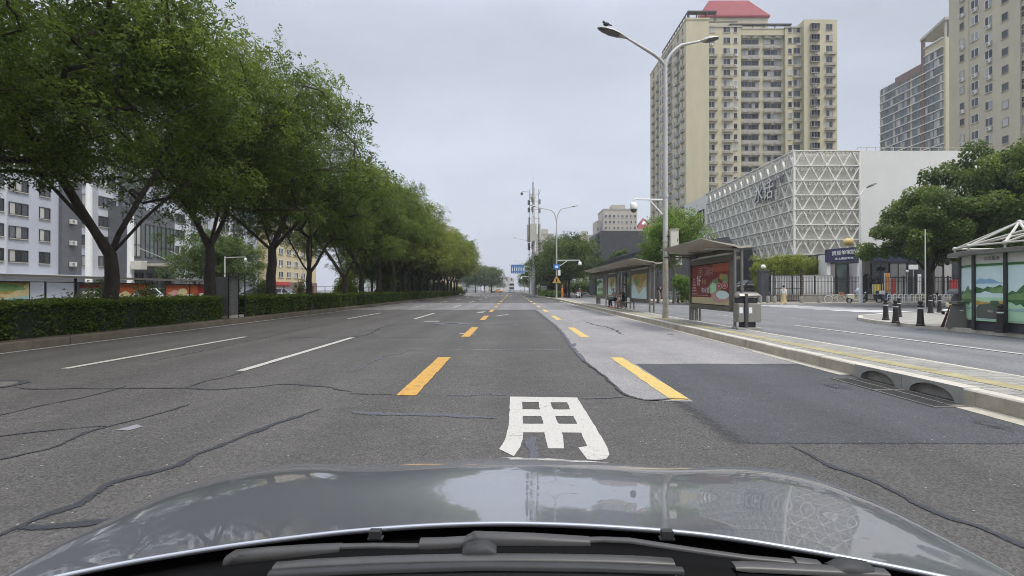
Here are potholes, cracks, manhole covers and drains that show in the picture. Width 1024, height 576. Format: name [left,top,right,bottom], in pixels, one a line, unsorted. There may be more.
drain grate [873,390,973,408]
crack [791,445,1024,548]
